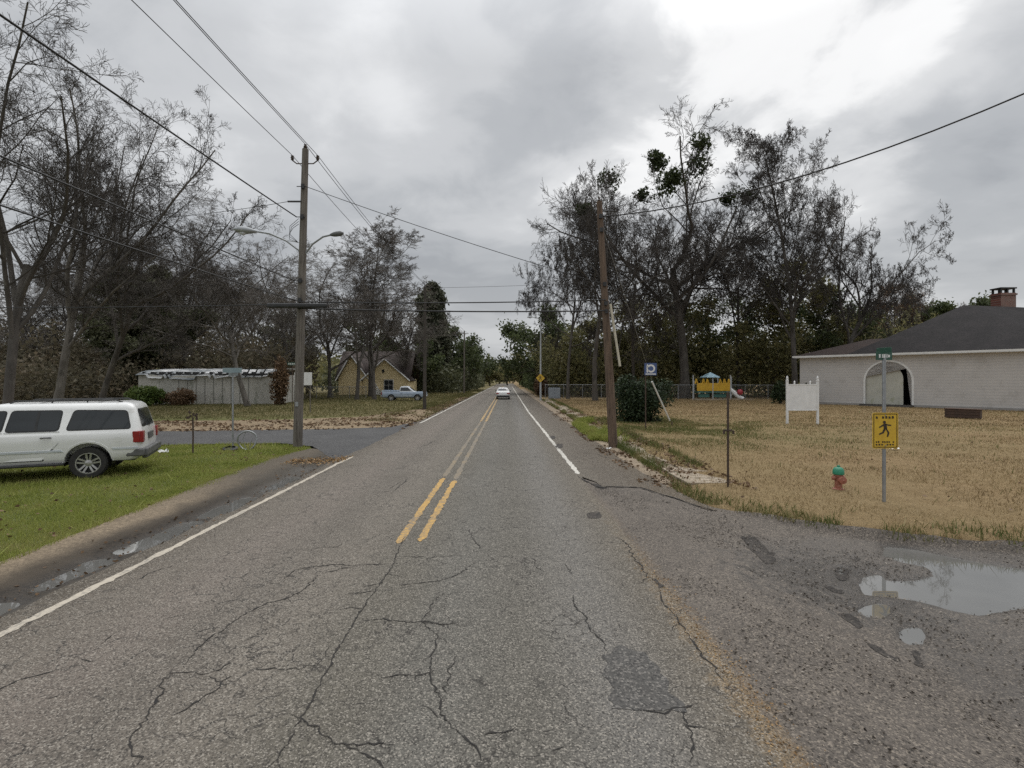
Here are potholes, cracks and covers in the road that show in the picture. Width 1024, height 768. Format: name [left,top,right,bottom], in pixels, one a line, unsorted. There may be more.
pothole [741,534,776,564]
crack [128,529,516,768]
crack [621,539,655,583]
crack [573,597,606,650]
pothole [835,566,851,581]
